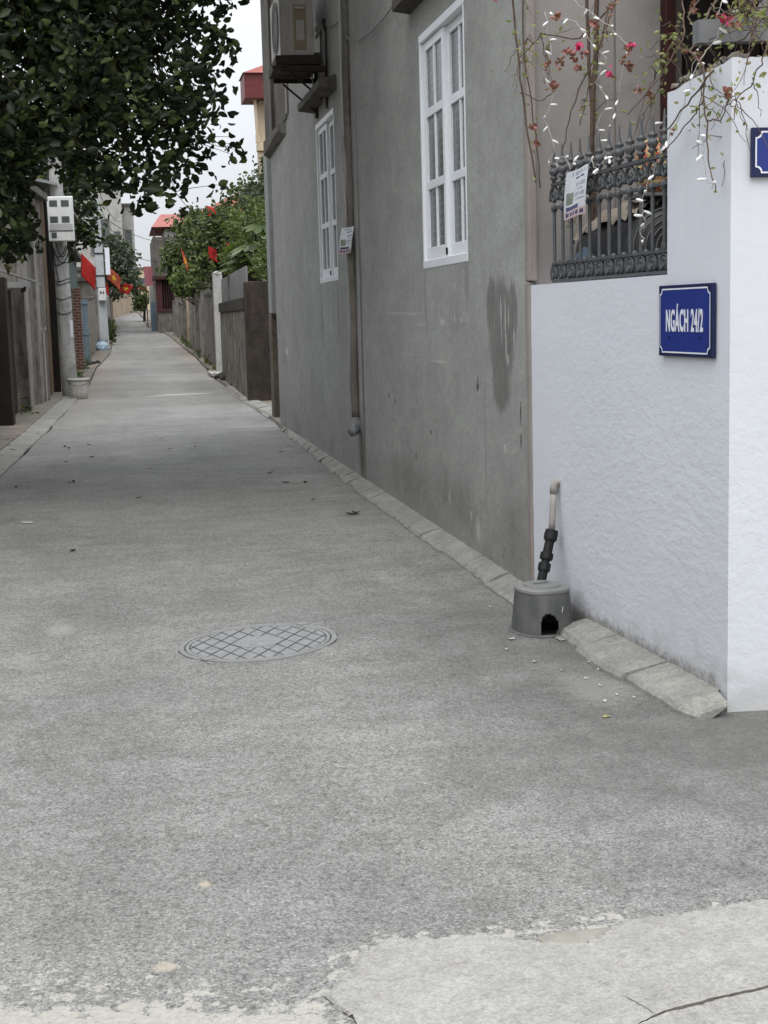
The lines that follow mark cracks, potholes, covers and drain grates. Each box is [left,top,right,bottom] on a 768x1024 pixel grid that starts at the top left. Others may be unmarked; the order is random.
manhole cover [178,622,338,663]
crack [625,985,768,1024]
